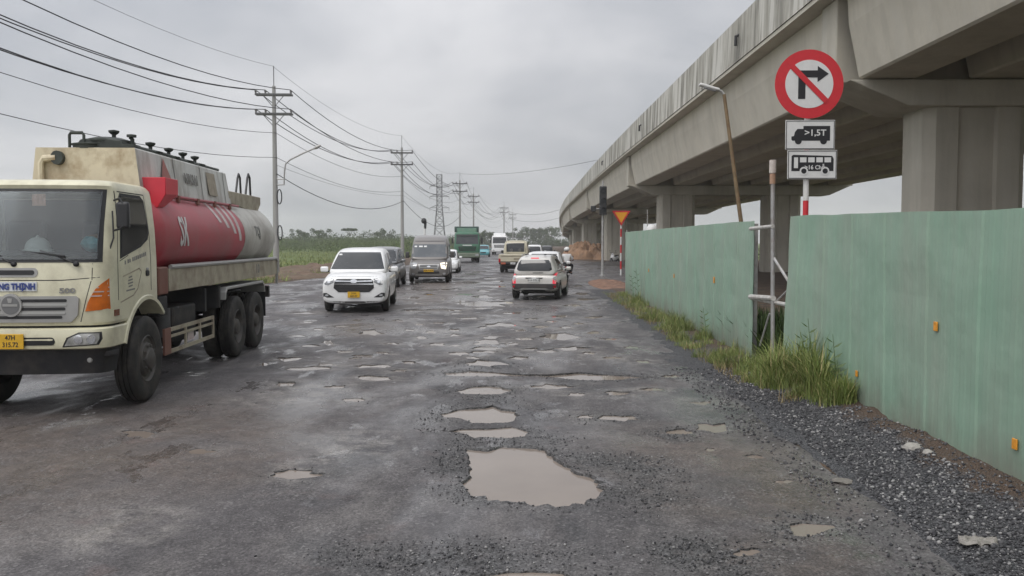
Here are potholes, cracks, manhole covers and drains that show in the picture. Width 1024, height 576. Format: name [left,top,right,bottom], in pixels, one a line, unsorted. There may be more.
pothole [696,423,728,433]
pothole [441,427,531,438]
pothole [457,385,515,394]
pothole [440,405,520,423]
pothole [270,469,325,479]
pothole [461,445,607,507]
pothole [790,522,837,536]
